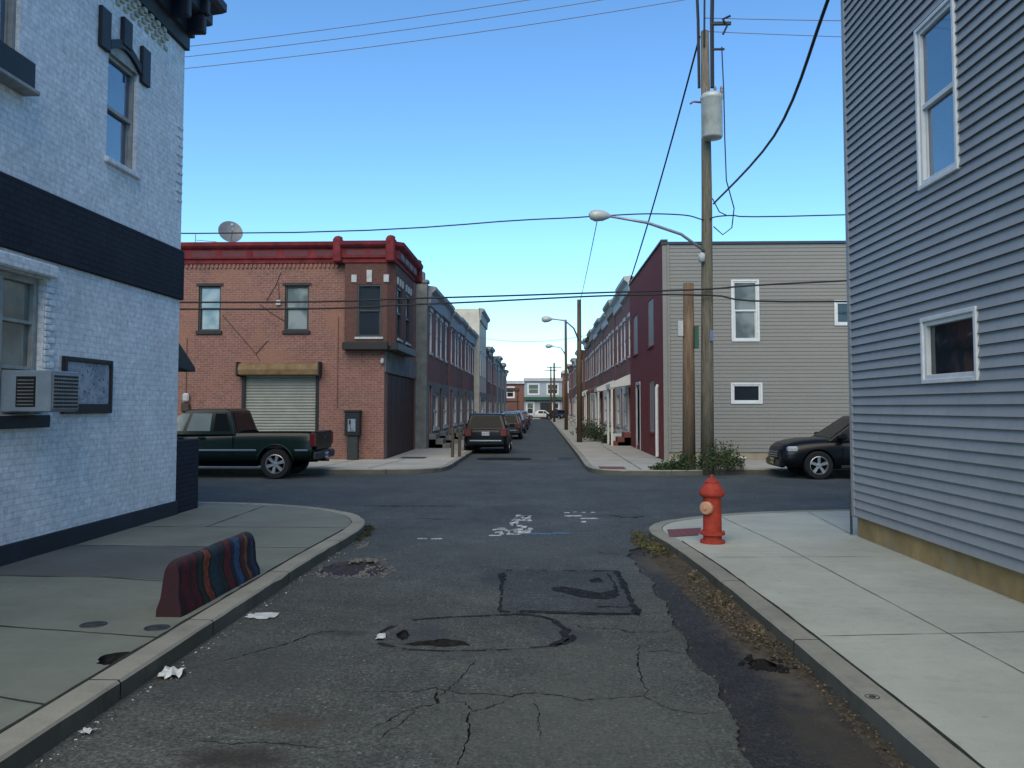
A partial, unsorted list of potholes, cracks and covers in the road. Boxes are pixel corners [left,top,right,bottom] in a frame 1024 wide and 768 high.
crack [359,641,722,765]
pothole [738,654,797,674]
crack [223,631,351,662]
pothole [308,557,398,580]
